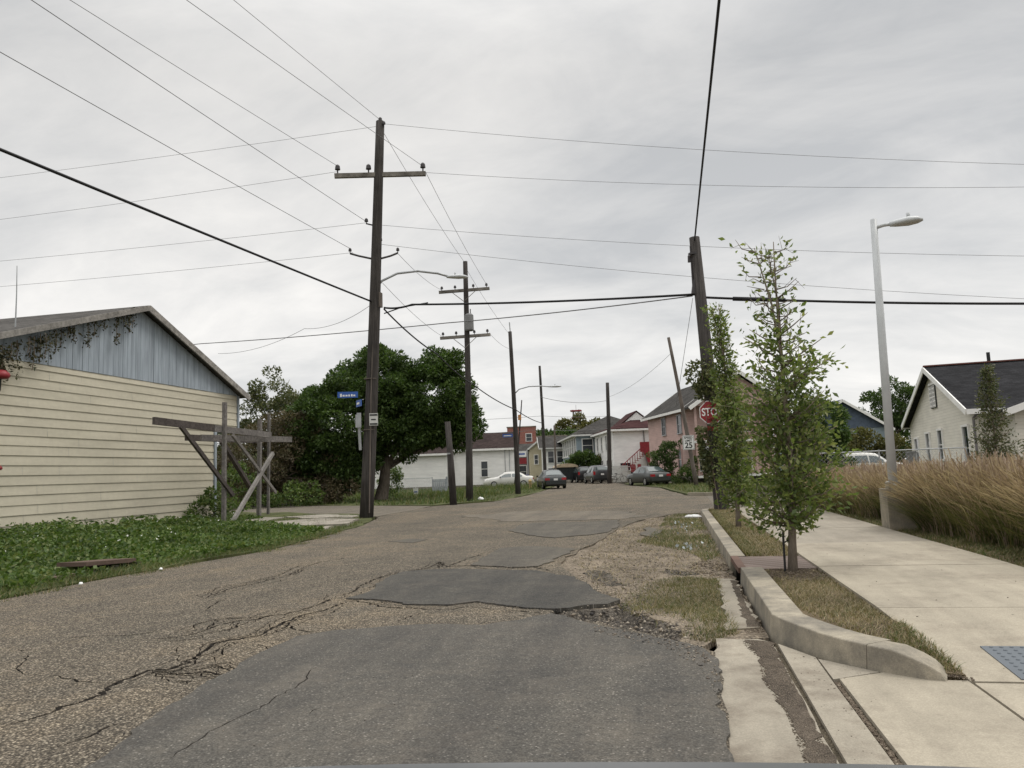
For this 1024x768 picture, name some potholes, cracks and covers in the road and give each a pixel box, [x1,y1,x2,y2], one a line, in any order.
pothole [556,604,683,641]
crack [173,670,311,757]
crack [22,562,343,722]
